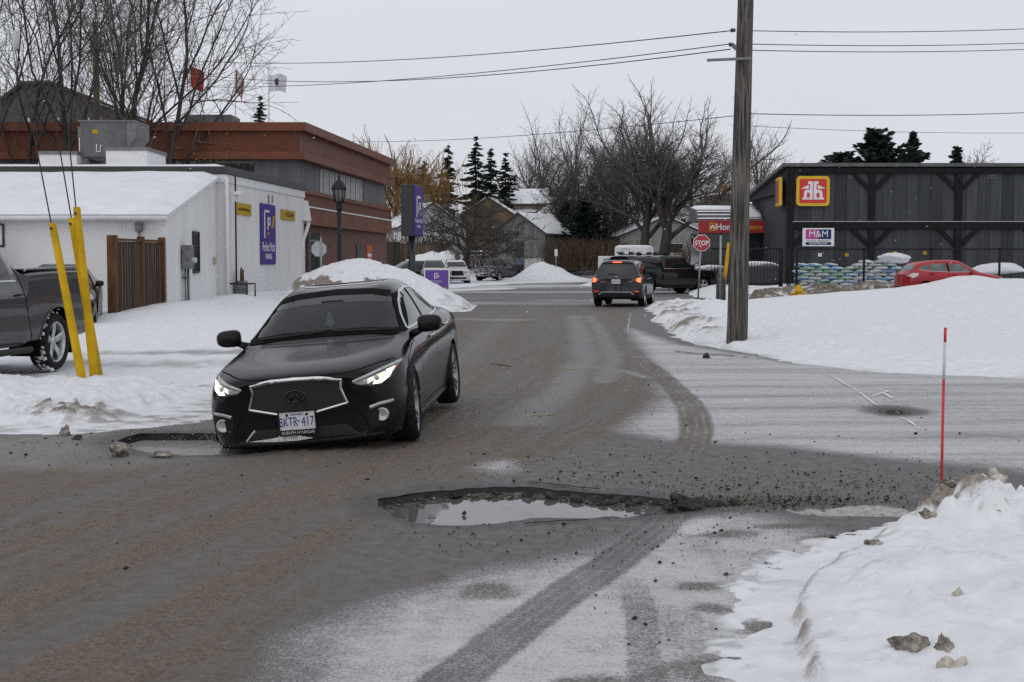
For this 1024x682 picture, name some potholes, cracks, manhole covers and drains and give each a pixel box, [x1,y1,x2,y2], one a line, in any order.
pothole [118,434,275,455]
pothole [378,487,684,525]
